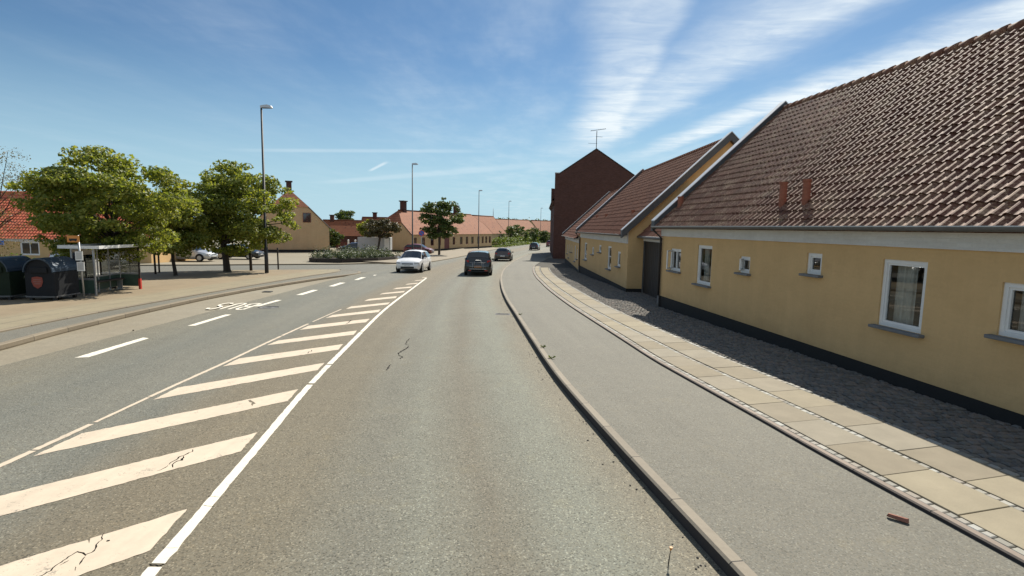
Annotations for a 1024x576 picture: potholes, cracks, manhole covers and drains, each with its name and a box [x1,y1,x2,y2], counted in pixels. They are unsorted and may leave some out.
crack [41,534,103,576]
